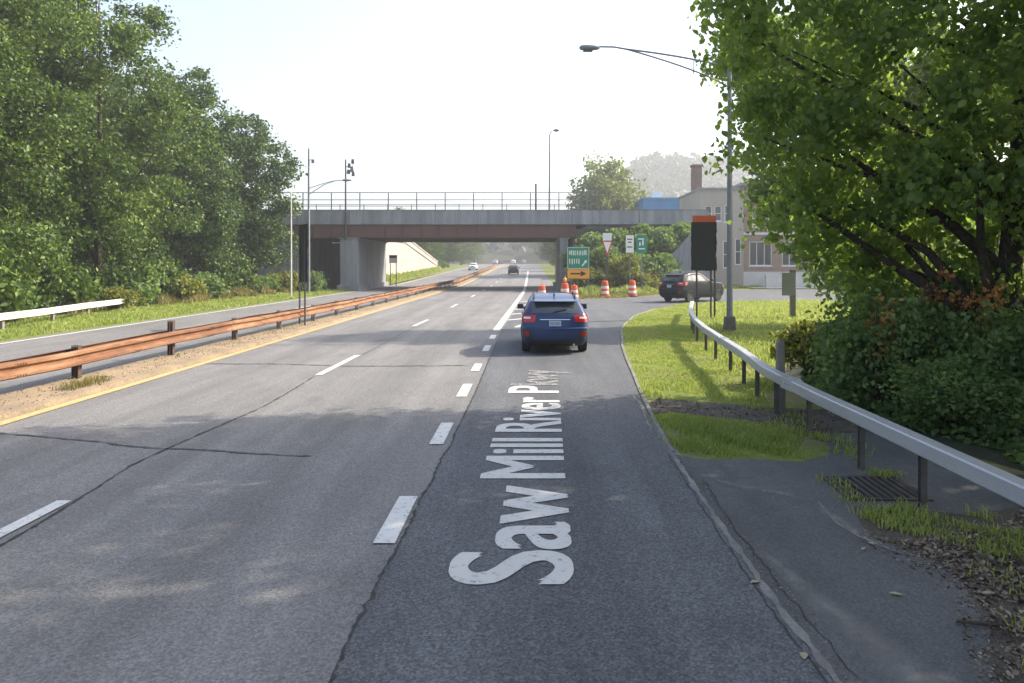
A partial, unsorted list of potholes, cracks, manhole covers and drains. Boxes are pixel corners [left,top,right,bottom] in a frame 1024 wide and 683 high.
crack [668,454,859,683]
drain grate [820,475,933,502]
